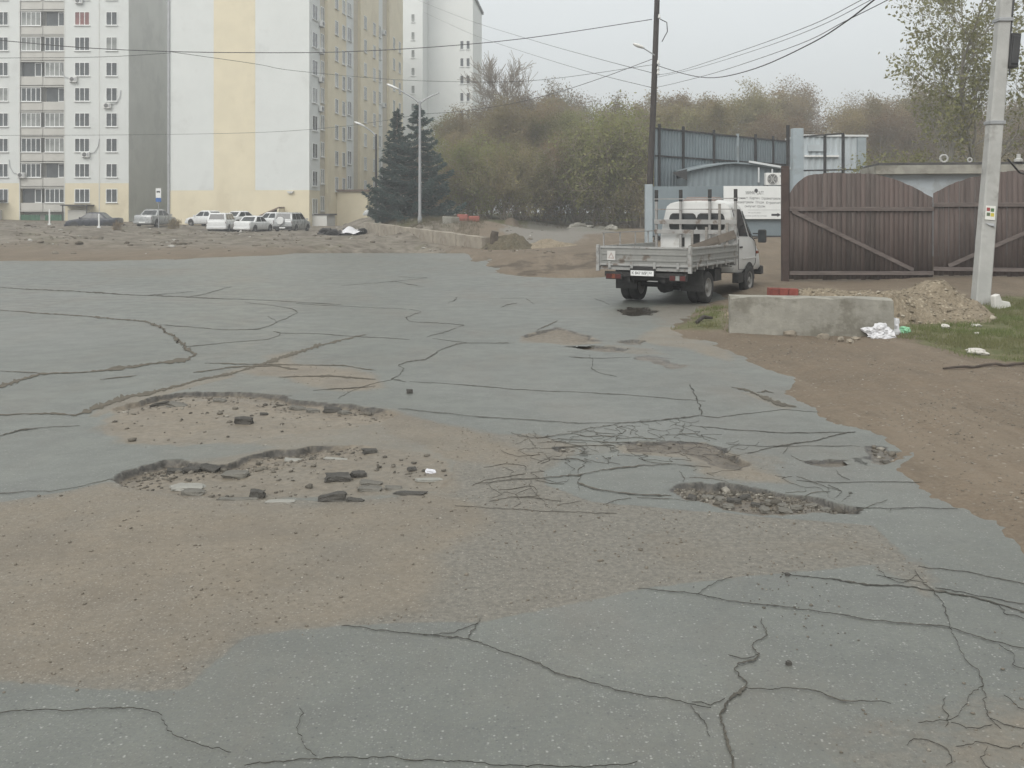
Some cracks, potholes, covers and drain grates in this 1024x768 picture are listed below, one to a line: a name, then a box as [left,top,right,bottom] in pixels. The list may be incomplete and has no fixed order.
pothole [84,441,475,511]
pothole [788,453,869,471]
crack [0,302,957,513]
pothole [601,305,673,318]
crack [0,707,229,752]
crack [246,710,637,768]
pothole [842,442,914,471]
pothole [79,389,416,450]
crack [342,621,711,708]
pothole [507,326,617,347]
pothole [649,477,890,524]
pothole [556,343,648,354]
